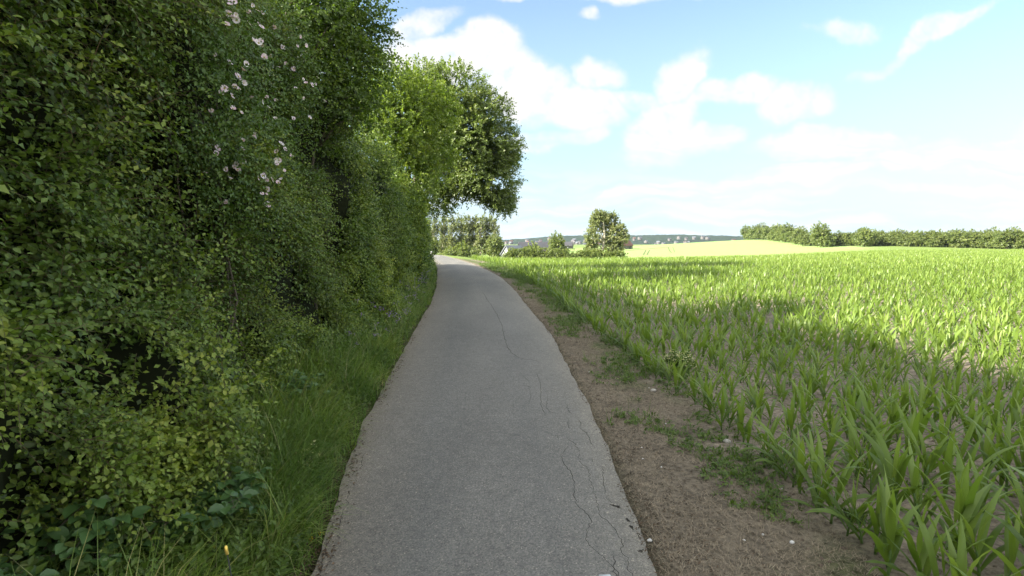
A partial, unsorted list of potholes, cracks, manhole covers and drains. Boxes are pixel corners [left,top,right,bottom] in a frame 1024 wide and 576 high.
crack [520,375,633,576]
